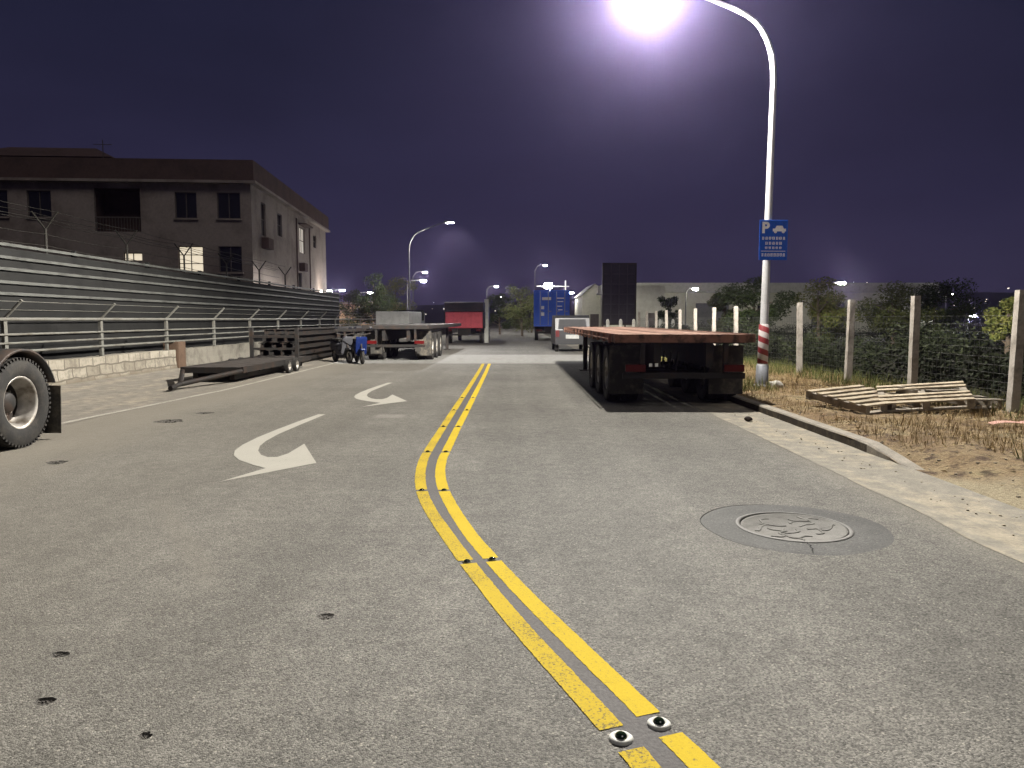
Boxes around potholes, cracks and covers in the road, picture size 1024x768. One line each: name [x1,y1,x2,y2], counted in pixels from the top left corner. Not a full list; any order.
manhole cover [700,505,894,556]
pothole [33,697,57,705]
